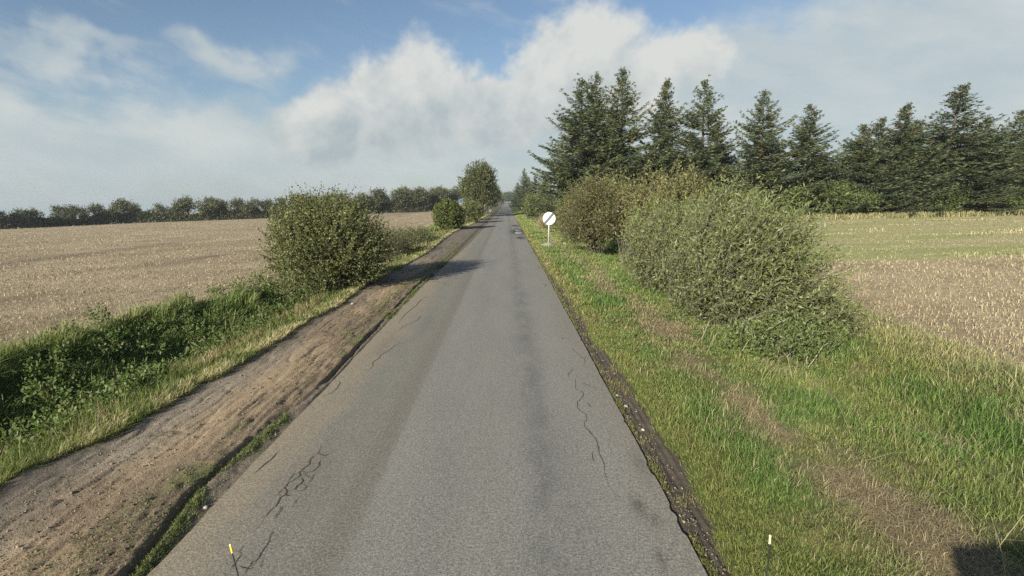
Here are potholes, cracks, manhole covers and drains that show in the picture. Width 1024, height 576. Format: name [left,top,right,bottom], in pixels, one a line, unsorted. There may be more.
crack [568,352,617,496]
crack [229,443,331,576]
